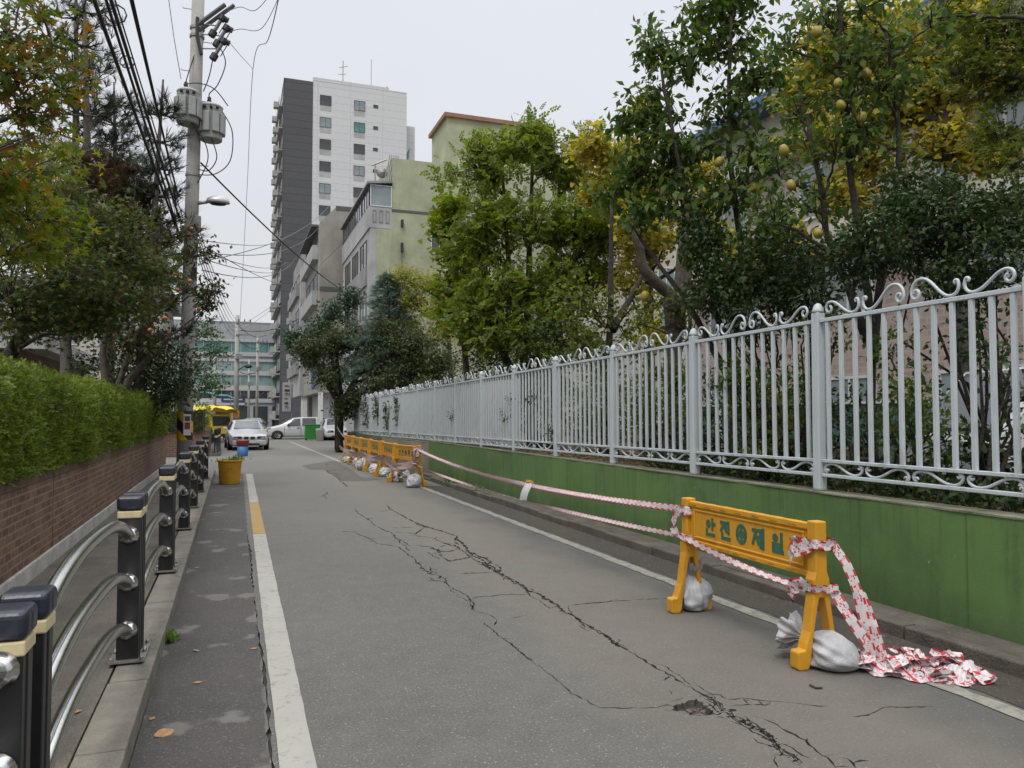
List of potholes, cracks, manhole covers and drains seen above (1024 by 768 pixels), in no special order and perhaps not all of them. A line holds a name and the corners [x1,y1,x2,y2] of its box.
crack [853,706,928,717]
pothole [672,699,714,717]
crack [342,506,867,768]
